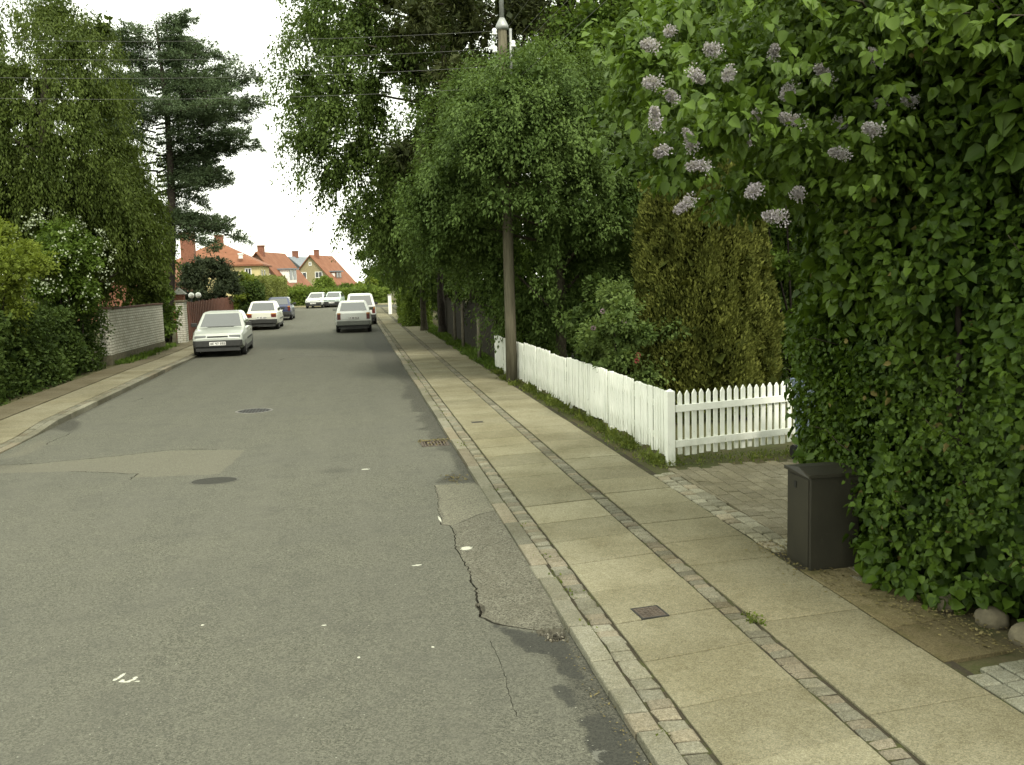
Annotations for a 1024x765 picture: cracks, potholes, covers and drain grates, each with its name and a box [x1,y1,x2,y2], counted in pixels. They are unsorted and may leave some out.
crack [434,485,536,716]
manhole cover [189,477,239,485]
utility cover [630,605,670,620]
